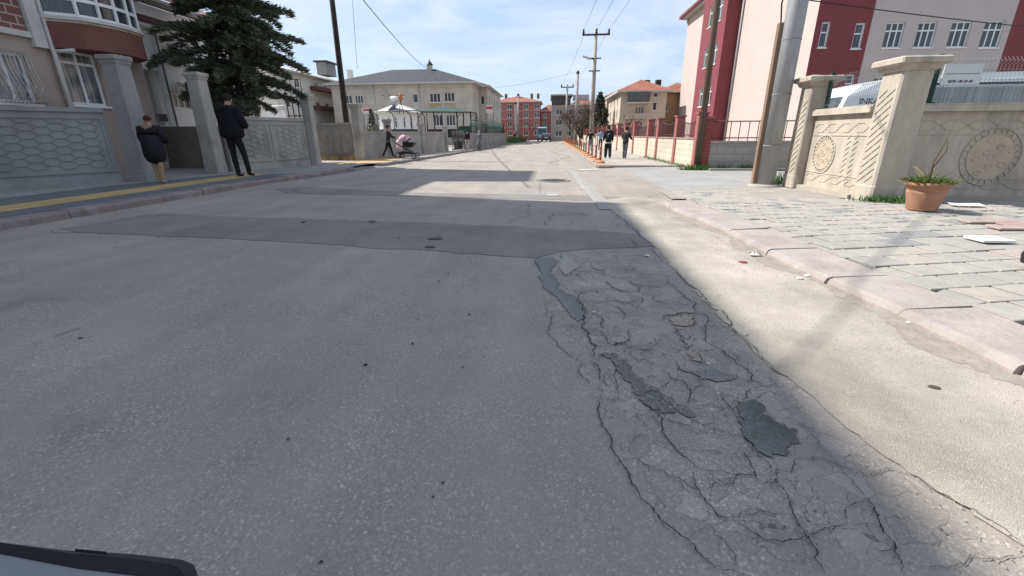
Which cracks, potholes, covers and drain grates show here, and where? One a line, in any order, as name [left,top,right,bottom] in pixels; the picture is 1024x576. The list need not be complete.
pothole [669,314,698,326]
crack [534,258,1021,575]
